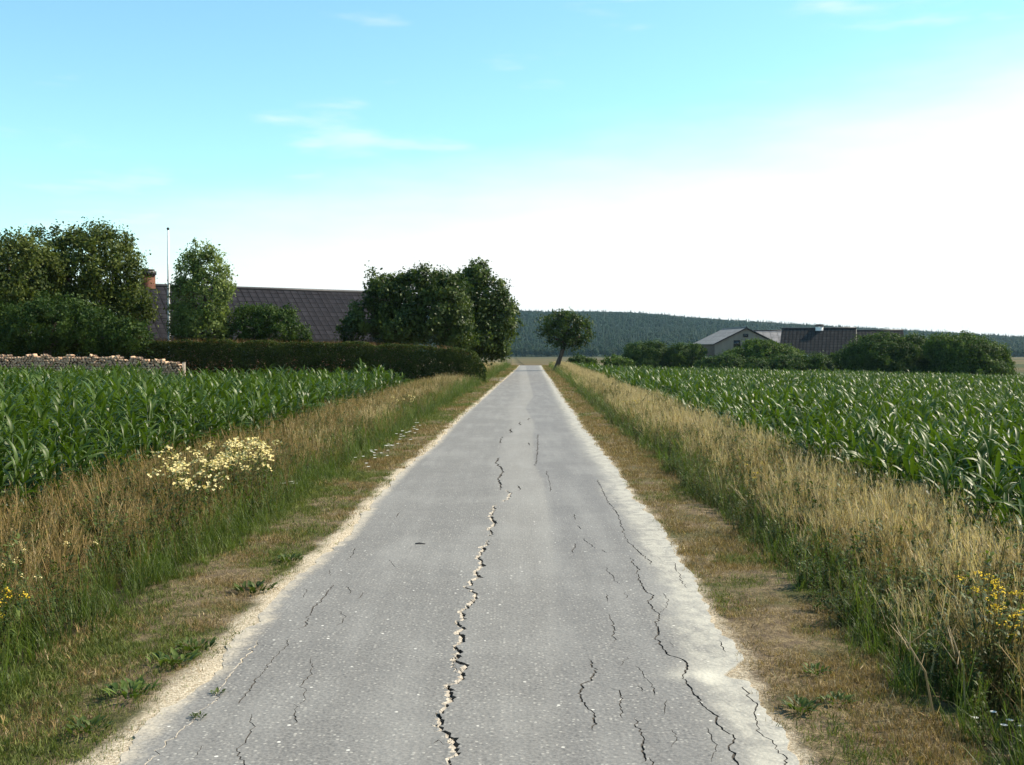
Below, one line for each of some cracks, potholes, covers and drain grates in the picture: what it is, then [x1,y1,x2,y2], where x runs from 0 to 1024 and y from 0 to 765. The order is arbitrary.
crack [431,418,539,765]
crack [572,481,788,765]
crack [143,571,363,765]
